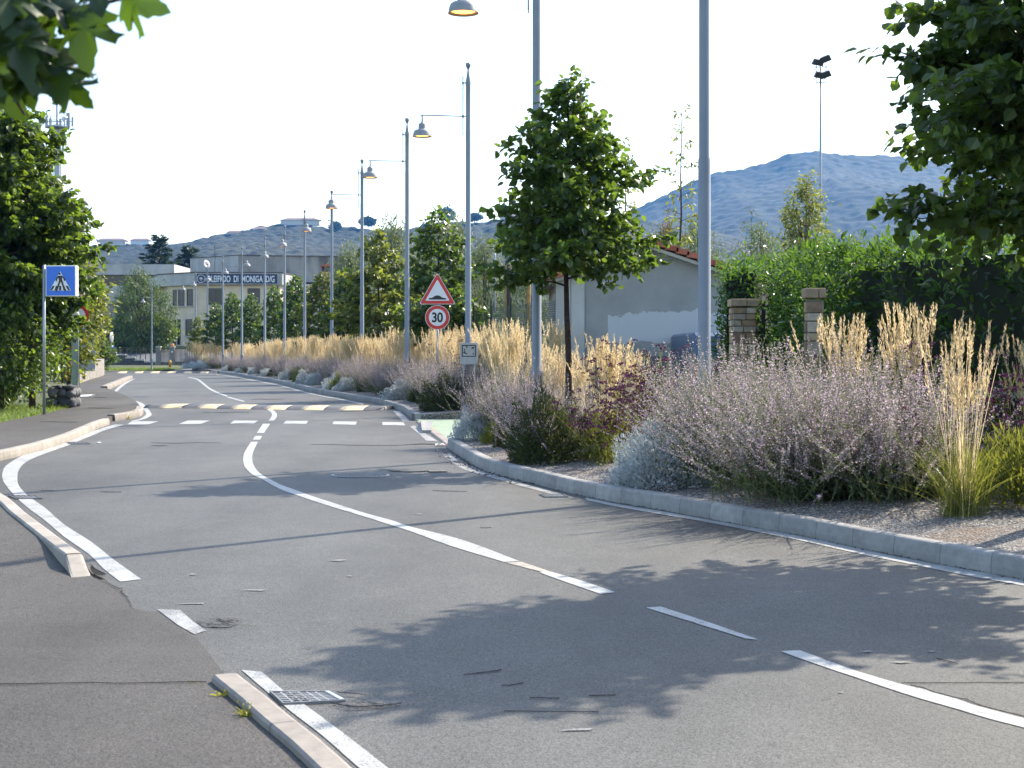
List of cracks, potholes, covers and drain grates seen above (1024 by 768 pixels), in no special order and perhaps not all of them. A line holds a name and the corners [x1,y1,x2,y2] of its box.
crack [330,691,401,707]
crack [464,669,616,712]
drain grate [269,691,346,706]
